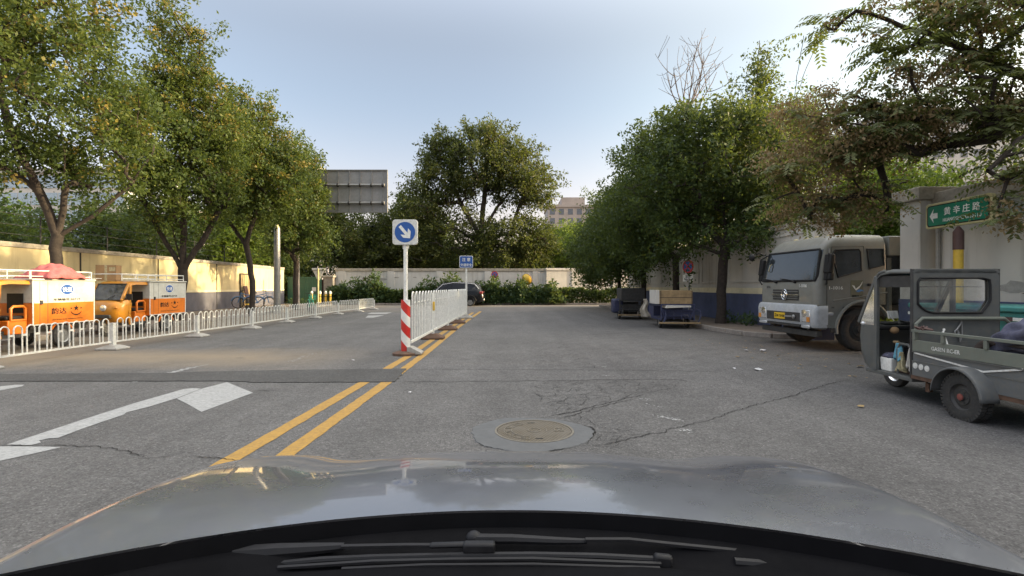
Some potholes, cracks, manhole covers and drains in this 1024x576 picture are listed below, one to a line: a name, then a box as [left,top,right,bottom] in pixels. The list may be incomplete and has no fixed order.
crack [8,444,236,461]
manhole cover [471,418,594,452]
crack [407,338,845,451]
